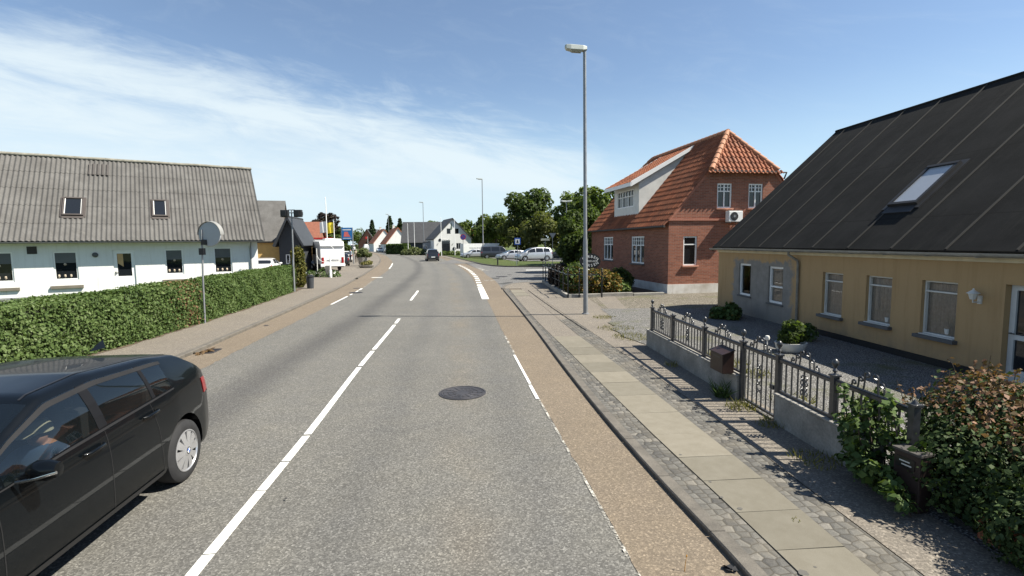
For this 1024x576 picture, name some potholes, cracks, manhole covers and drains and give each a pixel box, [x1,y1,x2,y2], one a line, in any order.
manhole cover [439,386,486,400]
